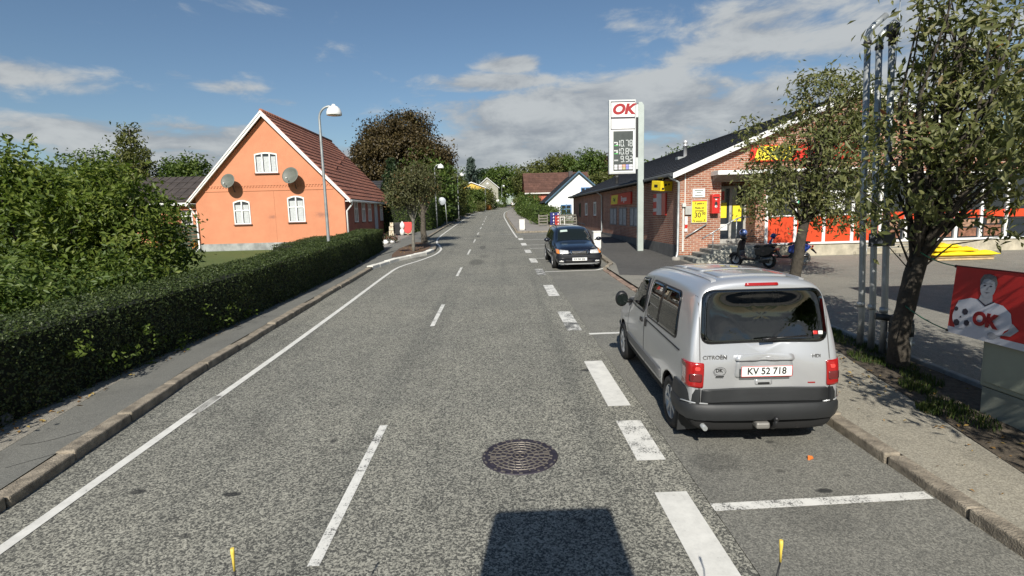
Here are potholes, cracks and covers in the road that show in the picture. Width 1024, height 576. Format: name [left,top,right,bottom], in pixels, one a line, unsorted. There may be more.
manhole cover [482,439,558,475]
